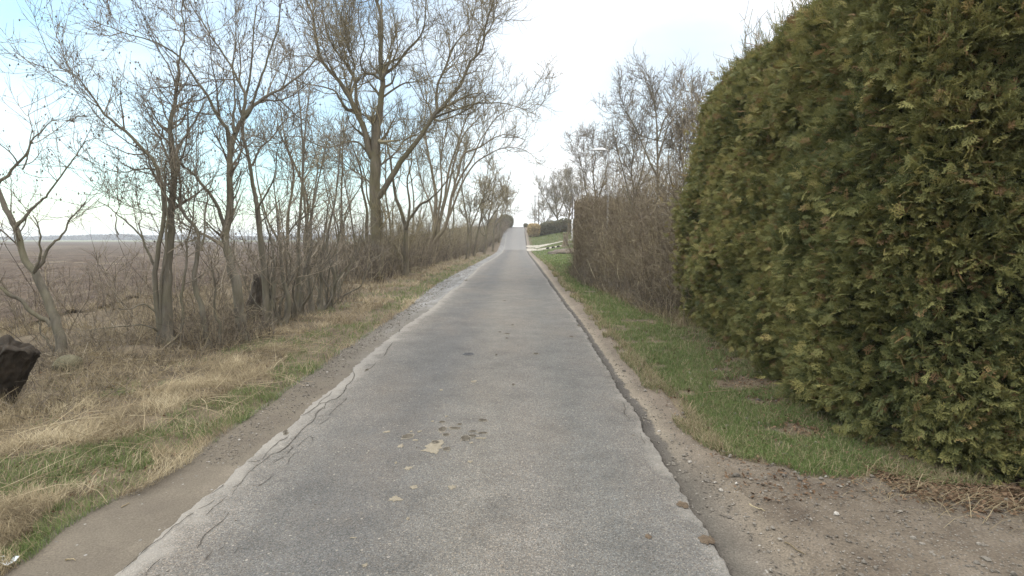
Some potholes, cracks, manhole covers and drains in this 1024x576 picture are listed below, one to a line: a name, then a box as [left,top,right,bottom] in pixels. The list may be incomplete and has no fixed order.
crack [122,329,400,575]
